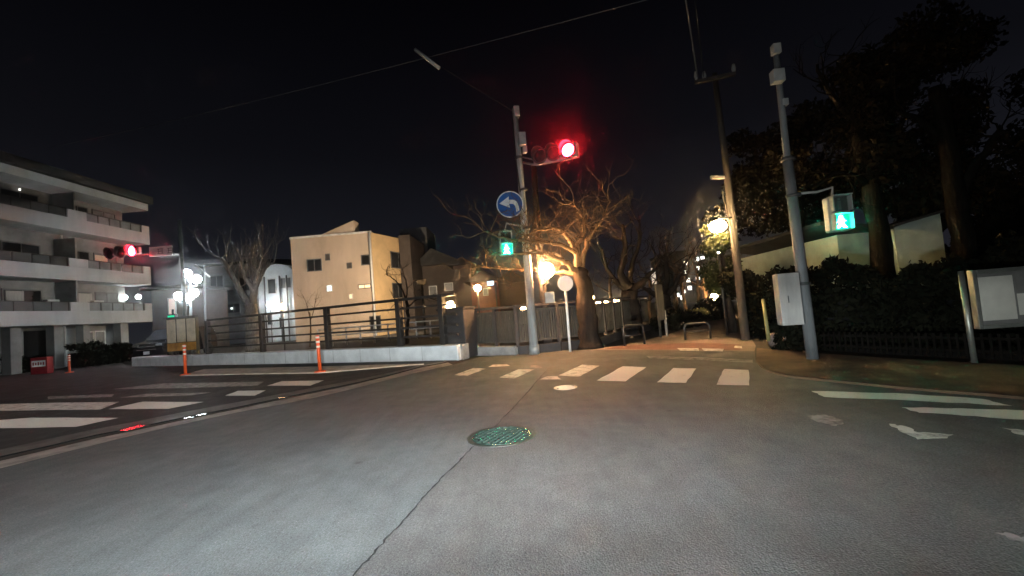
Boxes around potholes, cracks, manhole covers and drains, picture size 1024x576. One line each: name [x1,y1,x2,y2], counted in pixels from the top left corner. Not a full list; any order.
manhole cover [467,425,536,447]
